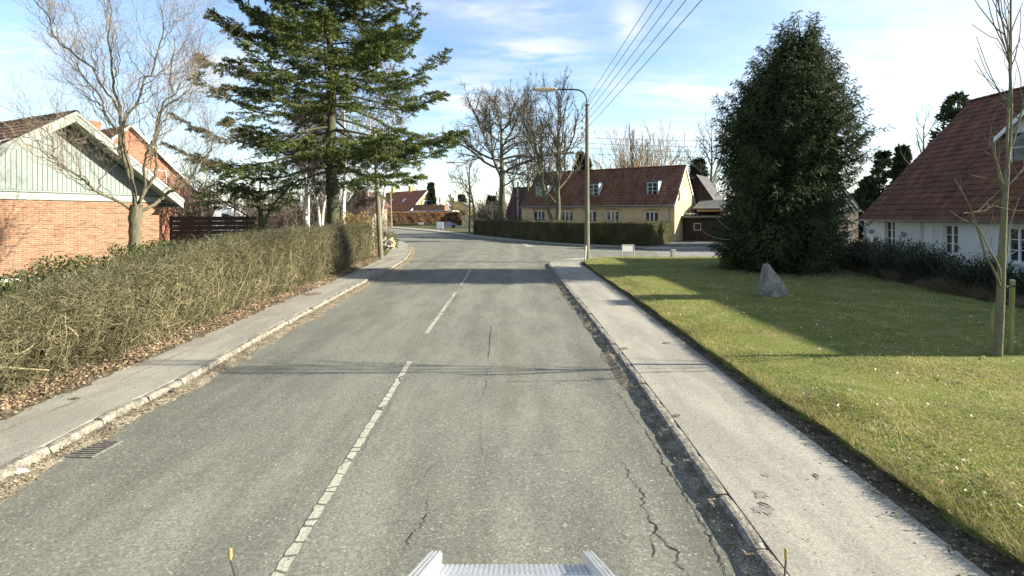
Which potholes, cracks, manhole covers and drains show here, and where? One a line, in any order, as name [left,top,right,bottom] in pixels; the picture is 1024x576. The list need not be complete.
crack [617,392,726,576]
drain grate [63,440,123,458]
